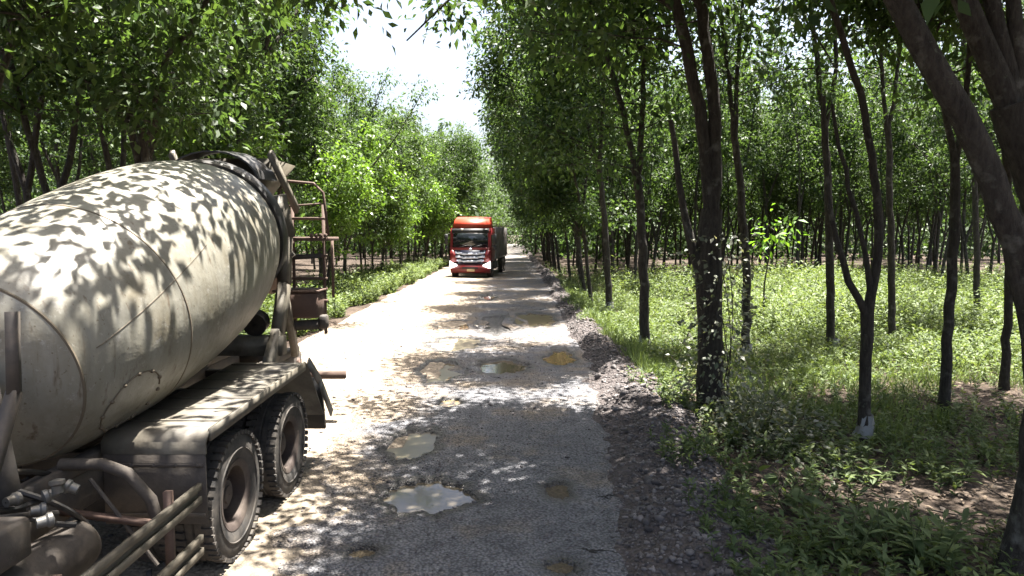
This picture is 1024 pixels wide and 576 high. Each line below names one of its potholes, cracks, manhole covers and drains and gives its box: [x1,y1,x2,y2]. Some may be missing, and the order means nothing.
pothole [529,343,589,372]
pothole [466,311,530,340]
pothole [361,418,456,473]
pothole [502,308,566,331]
pothole [353,466,510,527]
pothole [405,355,482,391]
pothole [447,354,547,377]
